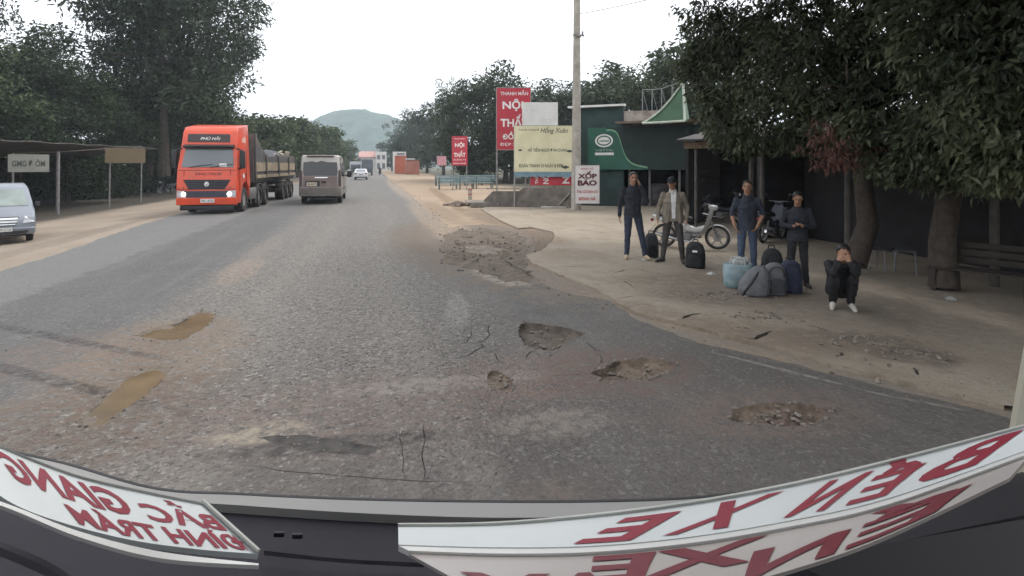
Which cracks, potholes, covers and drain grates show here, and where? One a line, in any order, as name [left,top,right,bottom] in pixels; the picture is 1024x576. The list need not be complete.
pothole [486,369,516,394]
pothole [589,356,680,384]
pothole [439,227,540,283]
pothole [517,319,591,351]
pothole [726,400,835,428]
crack [526,341,620,375]
crack [247,422,470,483]
pothole [133,309,216,342]
pothole [76,366,172,429]
crack [449,319,514,380]
